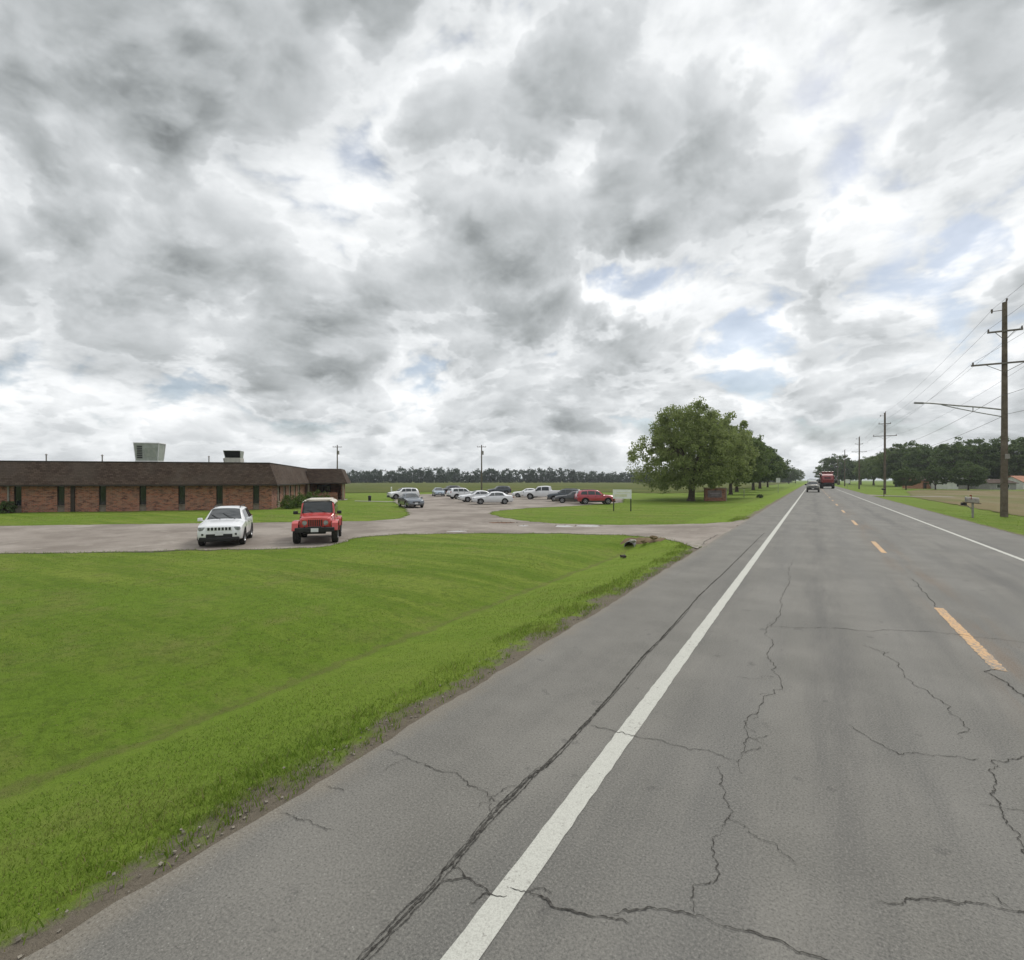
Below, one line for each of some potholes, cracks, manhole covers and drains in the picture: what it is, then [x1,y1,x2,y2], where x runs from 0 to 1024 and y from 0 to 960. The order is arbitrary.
crack [389,749,515,817]
crack [440,564,1019,960]
